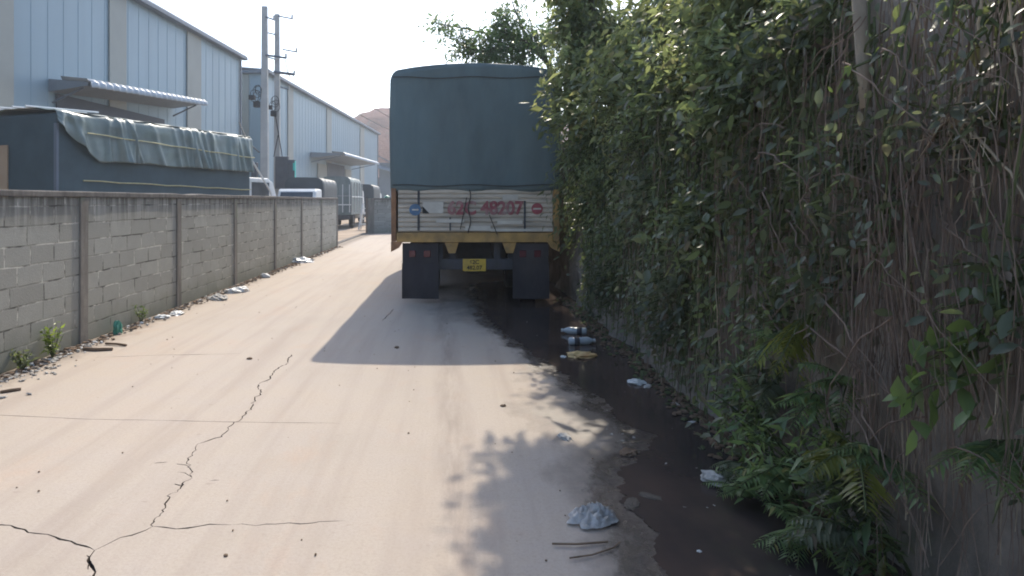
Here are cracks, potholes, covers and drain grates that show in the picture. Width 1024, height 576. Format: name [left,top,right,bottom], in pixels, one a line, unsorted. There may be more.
crack [0,355,330,576]
